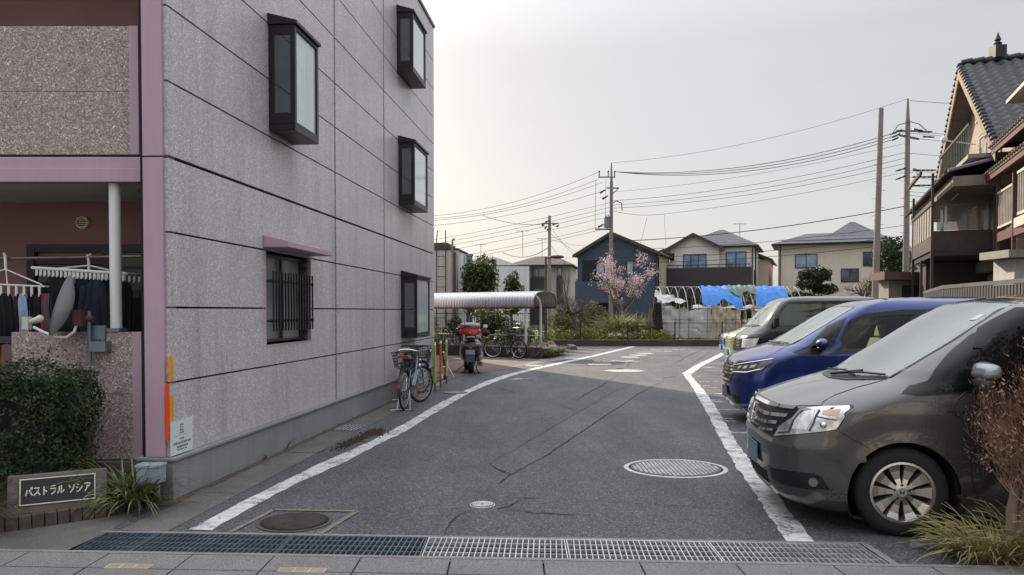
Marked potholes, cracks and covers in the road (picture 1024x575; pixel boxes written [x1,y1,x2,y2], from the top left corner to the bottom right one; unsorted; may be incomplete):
crack [477,350,738,534]
manhole cover [470,501,495,509]
drain grate [131,533,292,553]
drain grate [422,537,568,558]
drain grate [708,541,888,564]
drain grate [565,539,723,561]
manhole cover [256,512,333,533]
drain grate [74,532,158,551]
manhole cover [624,459,728,479]
drain grate [276,535,428,556]
